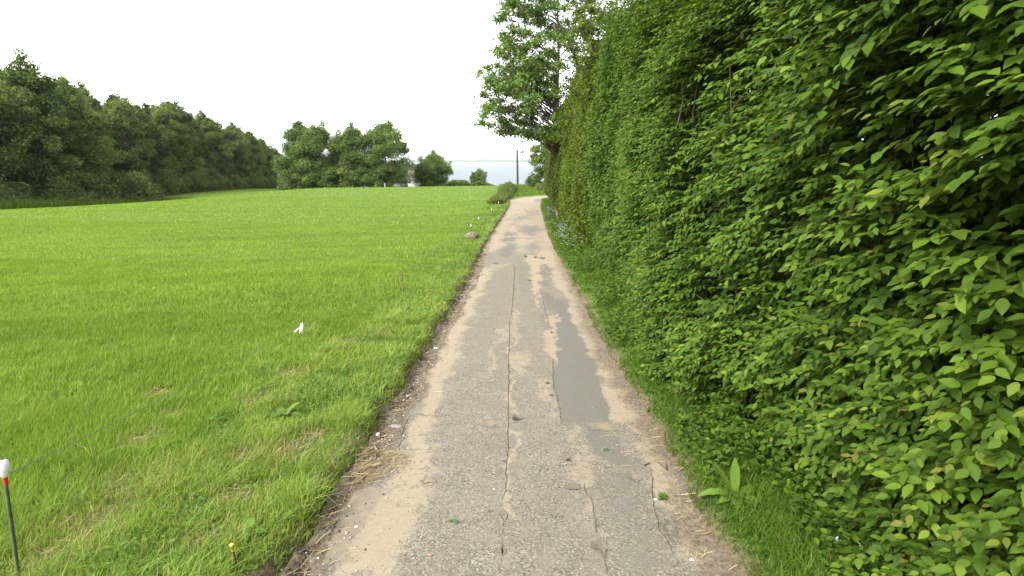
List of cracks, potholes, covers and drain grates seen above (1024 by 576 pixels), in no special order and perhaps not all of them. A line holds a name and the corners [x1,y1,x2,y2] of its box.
crack [497,268,519,494]
crack [651,475,678,567]
